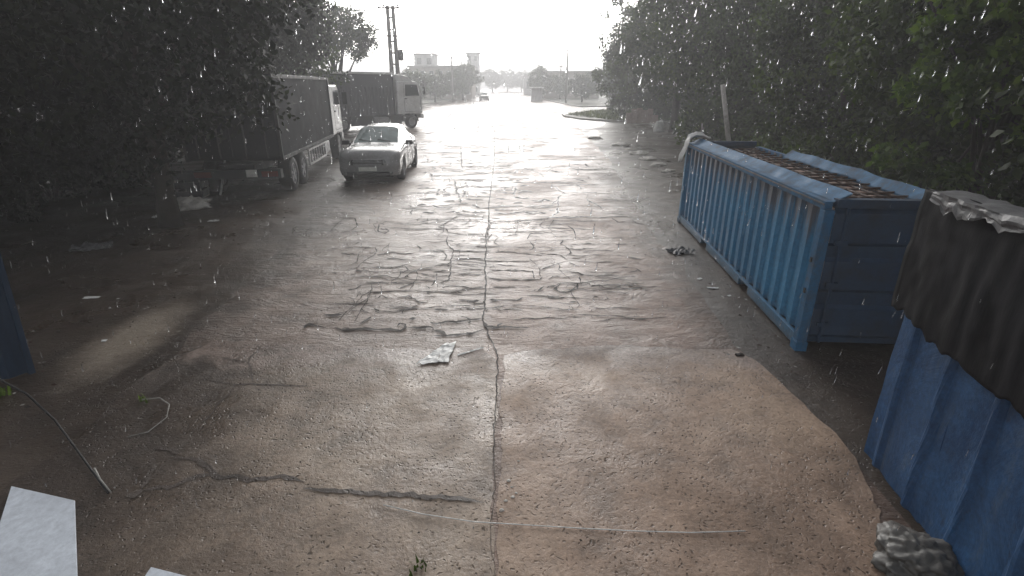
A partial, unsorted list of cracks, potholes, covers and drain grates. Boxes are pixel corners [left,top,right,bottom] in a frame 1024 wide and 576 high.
crack [123,445,484,503]
crack [302,112,662,336]
